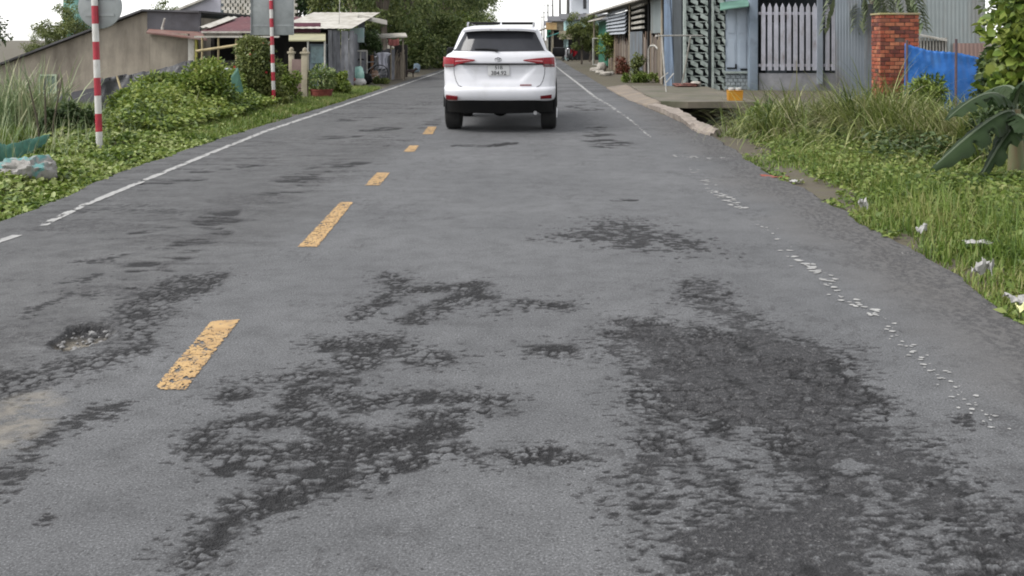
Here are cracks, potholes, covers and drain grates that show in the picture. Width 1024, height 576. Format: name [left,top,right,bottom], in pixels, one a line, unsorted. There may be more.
crack [0,117,1024,576]
pothole [41,320,114,354]
